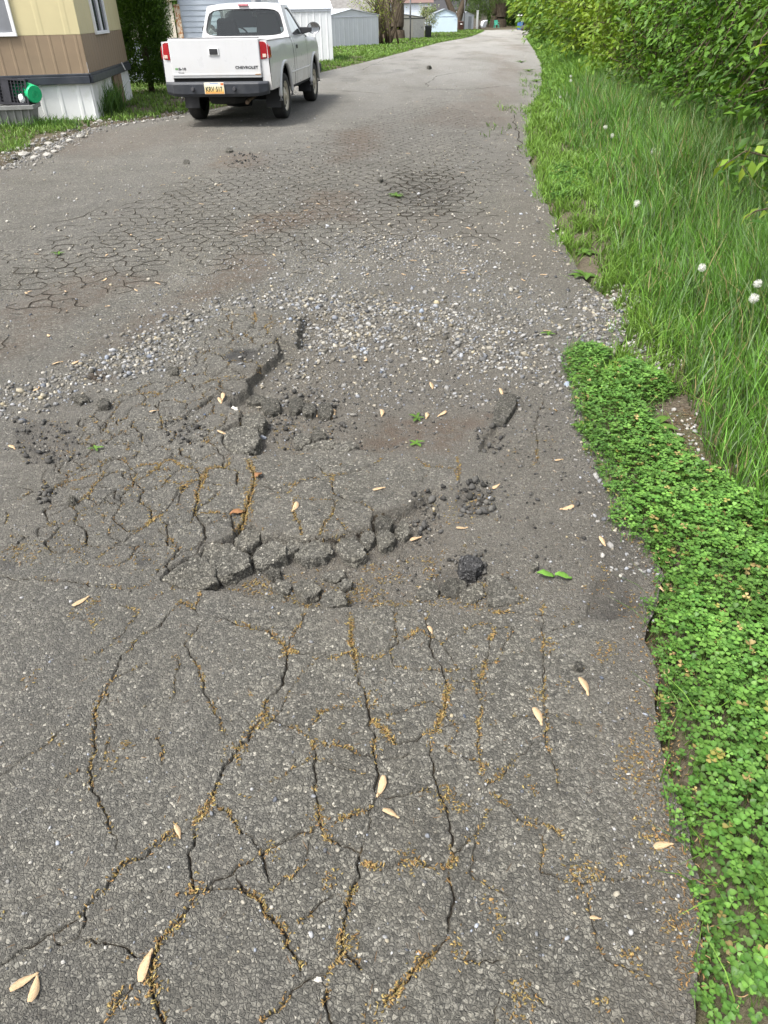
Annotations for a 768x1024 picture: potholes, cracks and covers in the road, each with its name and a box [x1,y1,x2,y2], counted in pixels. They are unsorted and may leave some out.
crack [1,97,522,314]
crack [19,591,658,1024]
pothole [159,486,513,612]
crack [5,313,405,572]
pothole [220,310,544,456]
